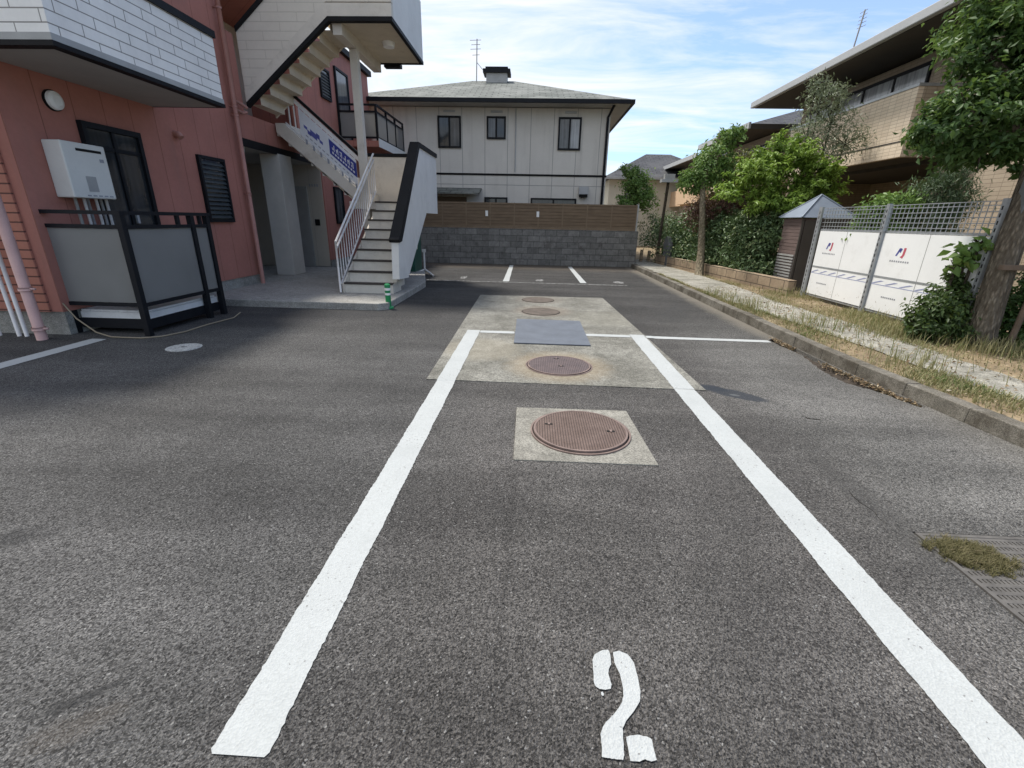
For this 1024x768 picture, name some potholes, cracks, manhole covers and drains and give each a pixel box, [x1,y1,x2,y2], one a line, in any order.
manhole cover [165,343,203,352]
manhole cover [521,308,560,316]
manhole cover [526,356,593,376]
manhole cover [513,407,659,466]
drain grate [914,532,1024,624]
